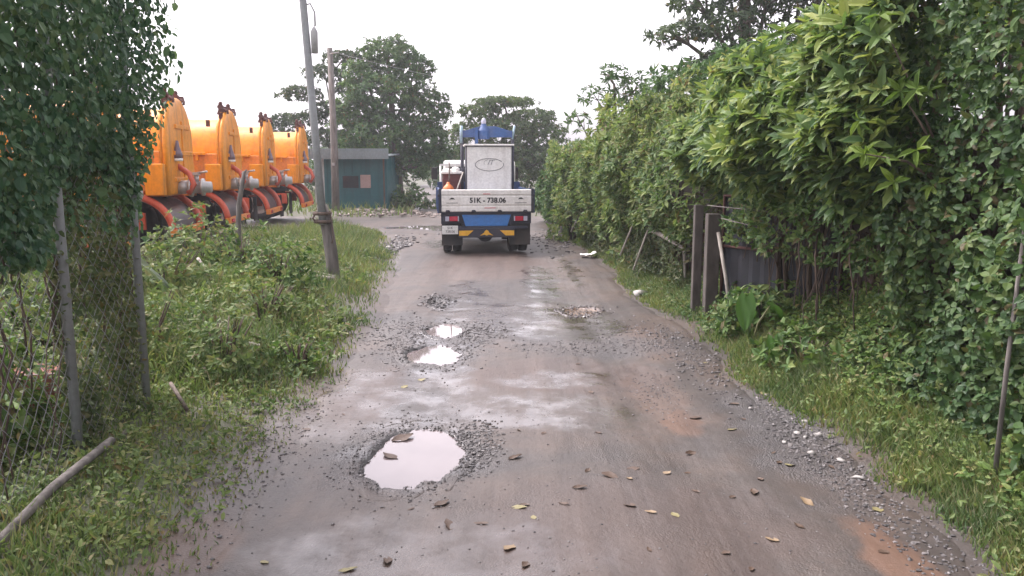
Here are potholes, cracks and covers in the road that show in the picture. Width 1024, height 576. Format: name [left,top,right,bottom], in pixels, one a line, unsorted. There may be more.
pothole [338,420,485,501]
pothole [416,322,473,340]
pothole [394,342,473,369]
pothole [424,295,450,309]
pothole [555,306,606,317]
